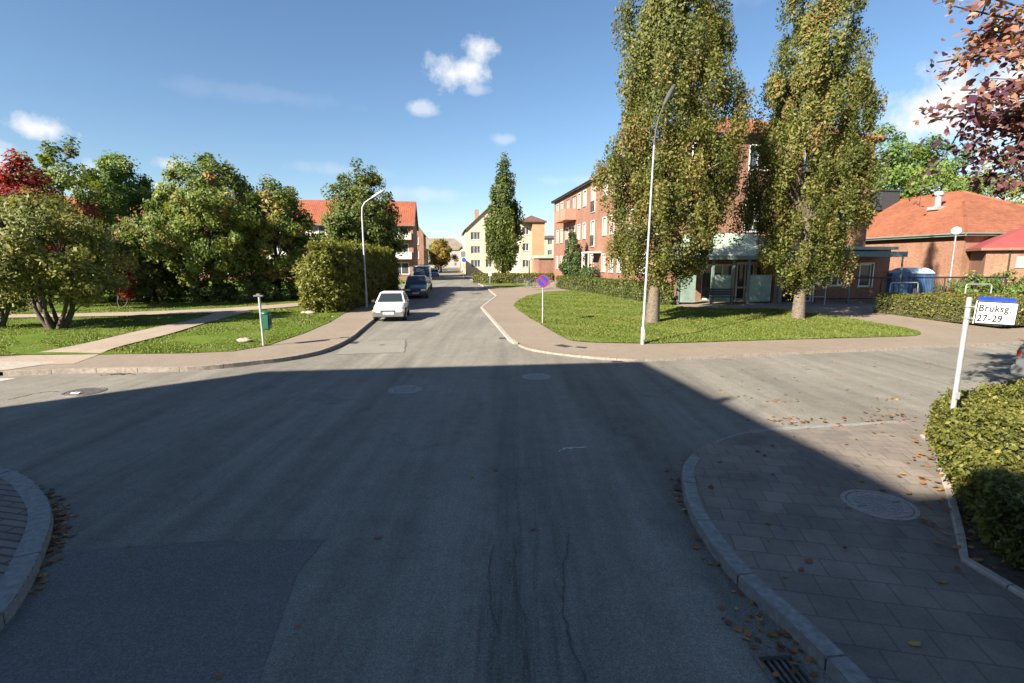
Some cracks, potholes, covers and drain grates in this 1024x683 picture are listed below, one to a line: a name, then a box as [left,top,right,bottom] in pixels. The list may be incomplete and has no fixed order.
crack [487,547,501,633]
drain grate [751,652,817,683]
crack [513,542,526,623]
crack [553,533,587,683]
manhole cover [388,385,422,394]
manhole cover [61,387,107,396]
manhole cover [840,489,921,521]
